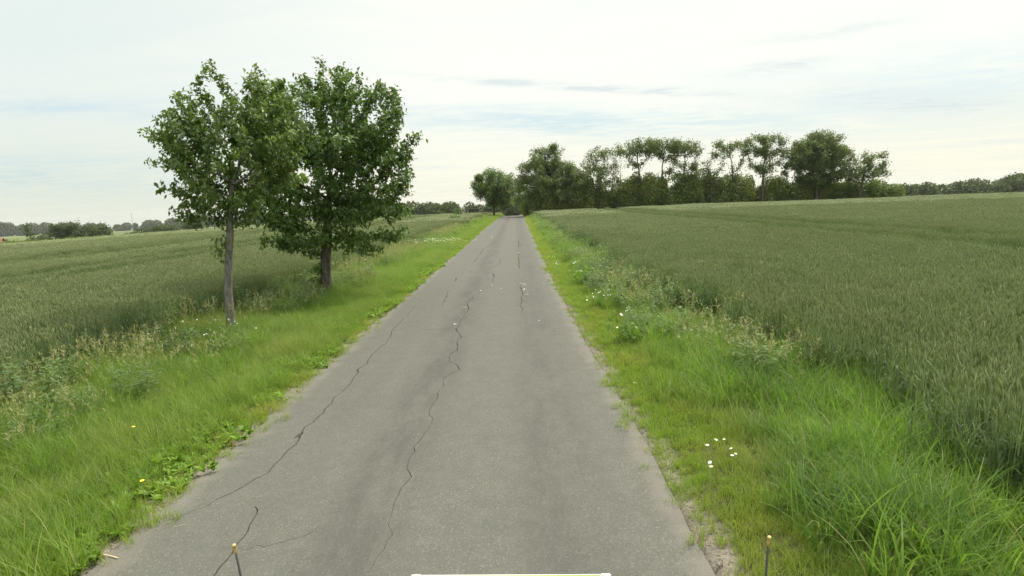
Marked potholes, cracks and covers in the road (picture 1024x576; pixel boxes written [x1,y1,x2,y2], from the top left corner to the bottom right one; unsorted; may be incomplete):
crack [370,242,501,571]
crack [184,304,419,576]
